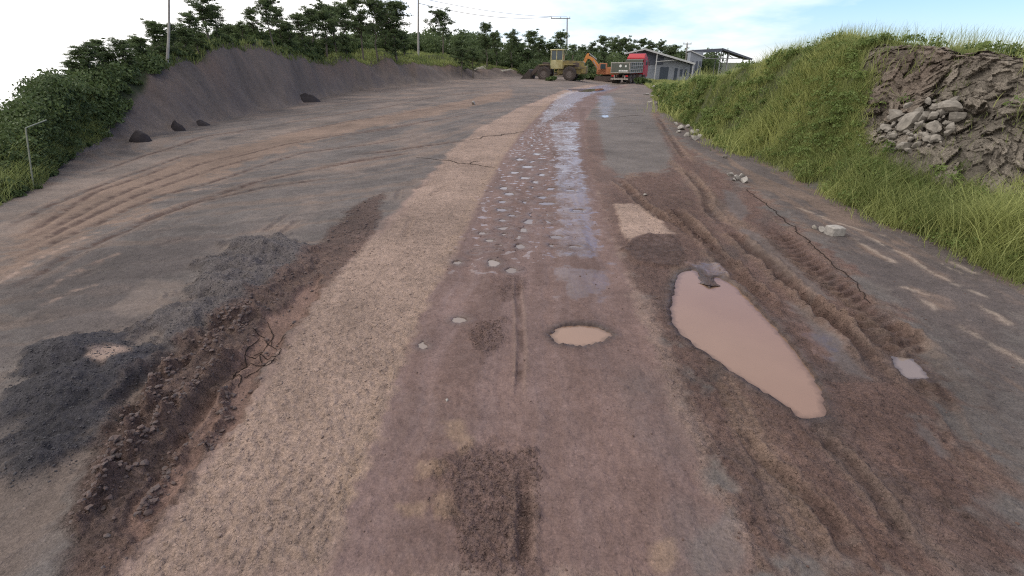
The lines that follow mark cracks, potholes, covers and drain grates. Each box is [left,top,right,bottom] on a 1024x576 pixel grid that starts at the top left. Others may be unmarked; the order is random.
pothole [657,266,848,433]
crack [232,322,286,387]
pothole [538,319,624,352]
crack [747,190,870,303]
pothole [876,348,948,389]
